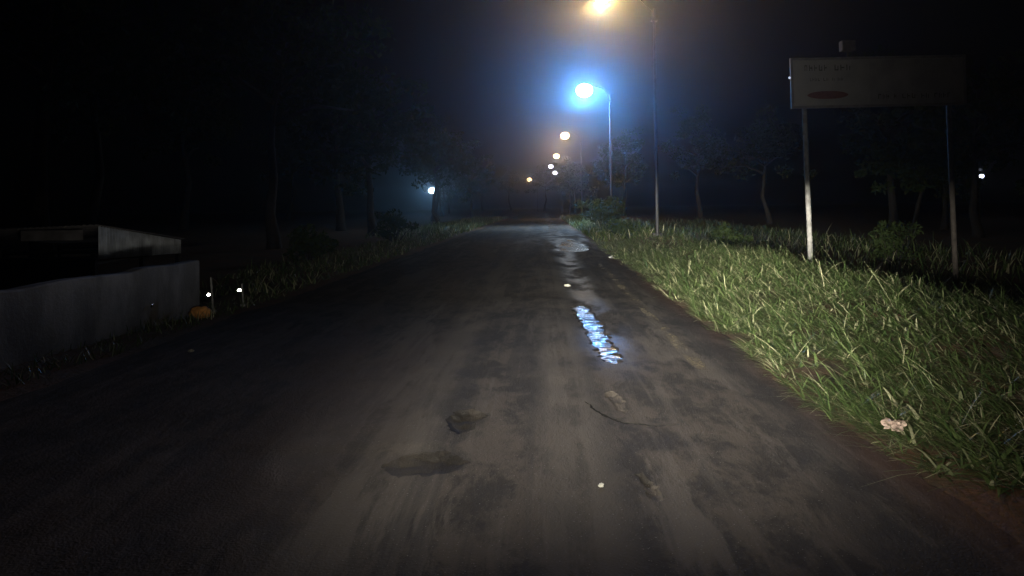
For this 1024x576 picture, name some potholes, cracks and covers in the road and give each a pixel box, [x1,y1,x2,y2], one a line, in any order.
pothole [634,471,665,503]
pothole [445,408,489,434]
pothole [381,450,471,478]
crack [585,402,679,427]
pothole [605,391,628,414]
